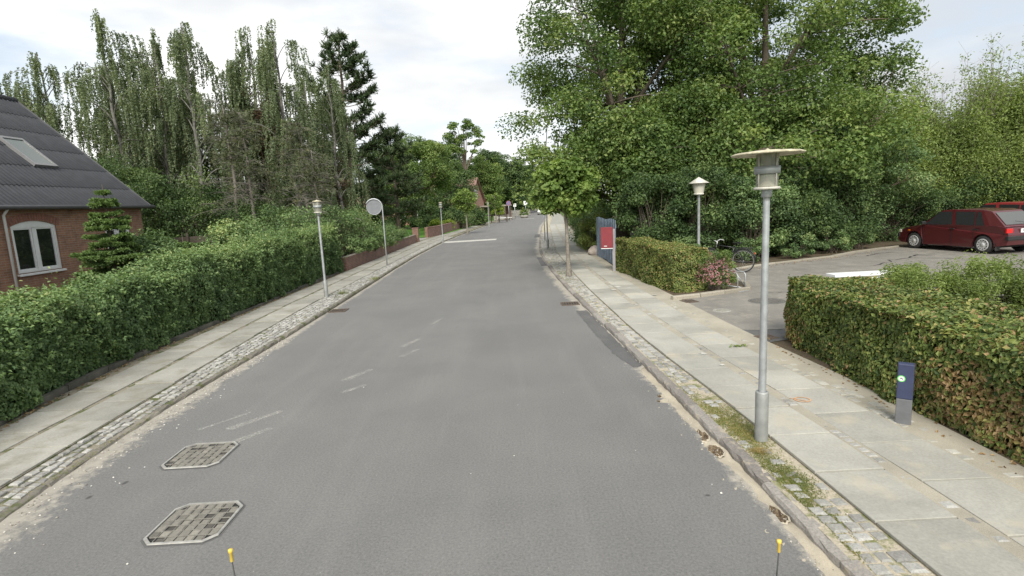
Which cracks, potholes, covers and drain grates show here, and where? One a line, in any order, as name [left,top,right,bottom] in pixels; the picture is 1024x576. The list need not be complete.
manhole cover [159,441,241,471]
manhole cover [140,500,246,548]
